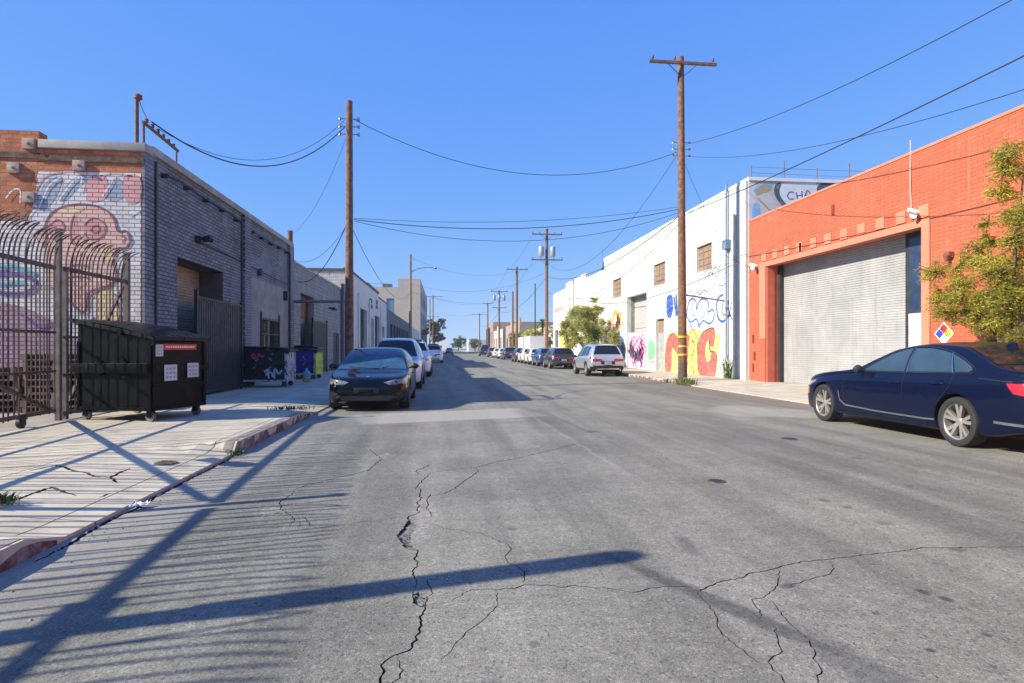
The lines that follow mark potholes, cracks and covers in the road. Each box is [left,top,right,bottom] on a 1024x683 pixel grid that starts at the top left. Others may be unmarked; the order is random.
crack [11,465,130,502]
crack [250,443,1023,683]
pothole [398,519,418,550]
pothole [413,592,427,610]
